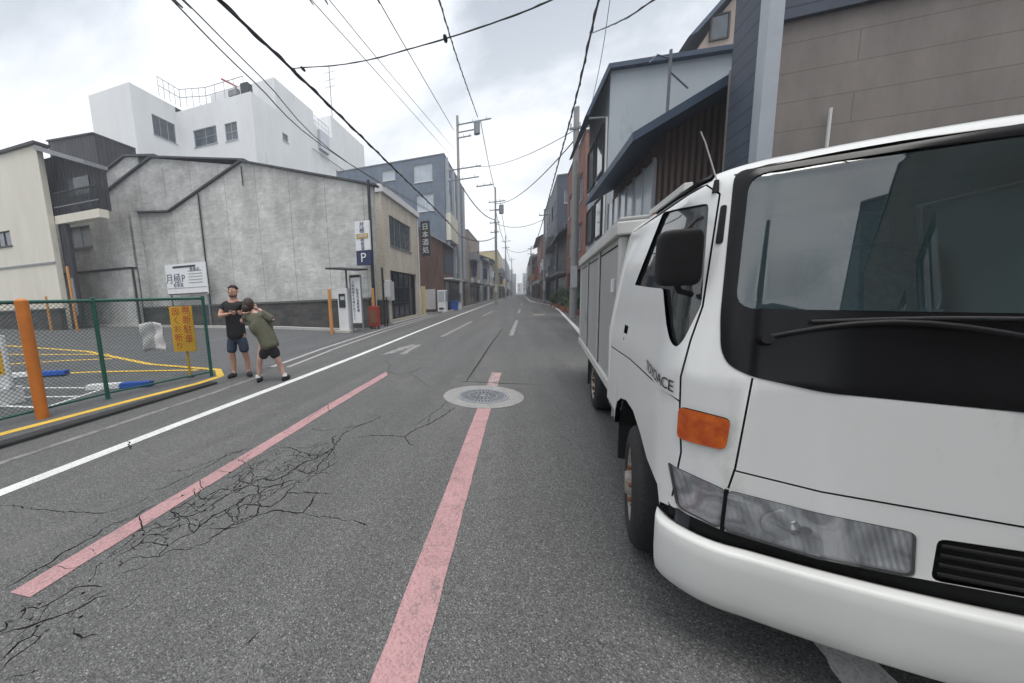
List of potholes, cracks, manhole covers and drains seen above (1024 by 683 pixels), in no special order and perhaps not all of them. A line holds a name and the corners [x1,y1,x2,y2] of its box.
crack [0,403,455,679]
manhole cover [444,386,524,409]
